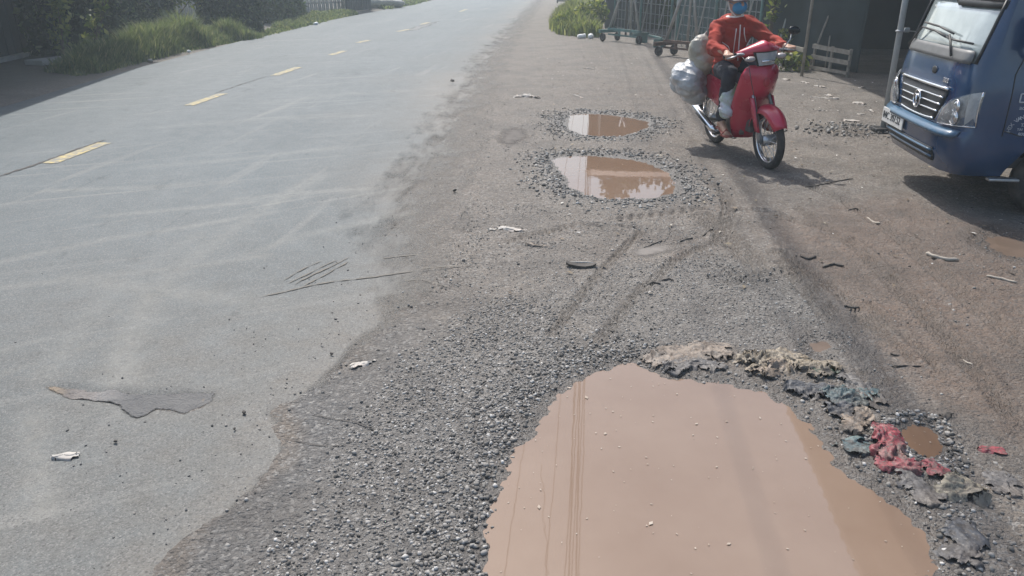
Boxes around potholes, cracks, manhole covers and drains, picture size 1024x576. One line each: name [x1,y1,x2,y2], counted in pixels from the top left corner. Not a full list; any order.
pothole [975,228,1024,258]
pothole [530,108,683,144]
pothole [368,323,1024,576]
crack [260,254,470,297]
pothole [509,145,733,212]
